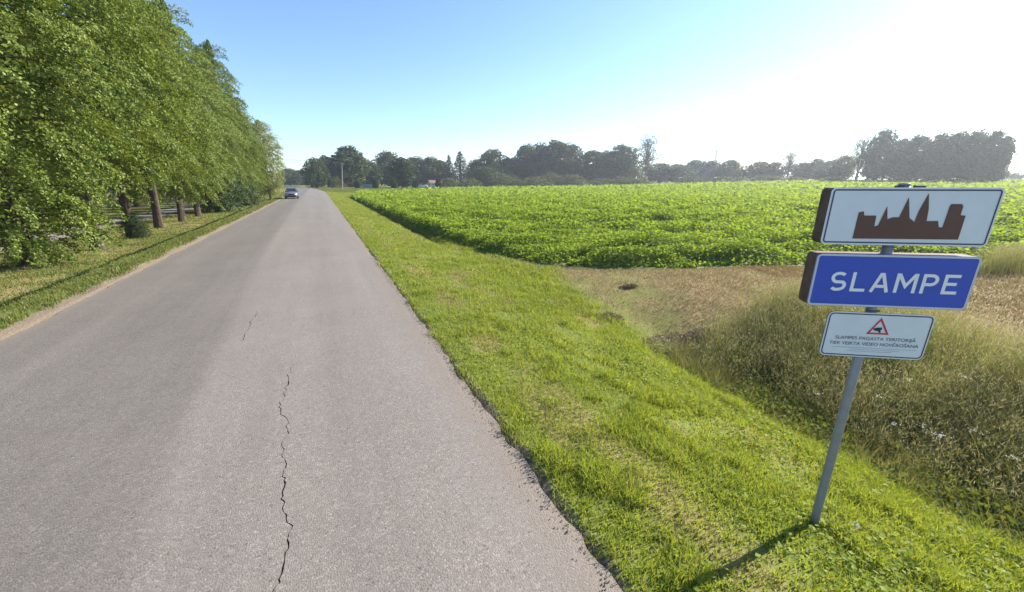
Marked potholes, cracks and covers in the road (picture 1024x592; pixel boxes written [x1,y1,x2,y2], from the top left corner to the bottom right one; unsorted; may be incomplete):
crack [272,357,296,592]
